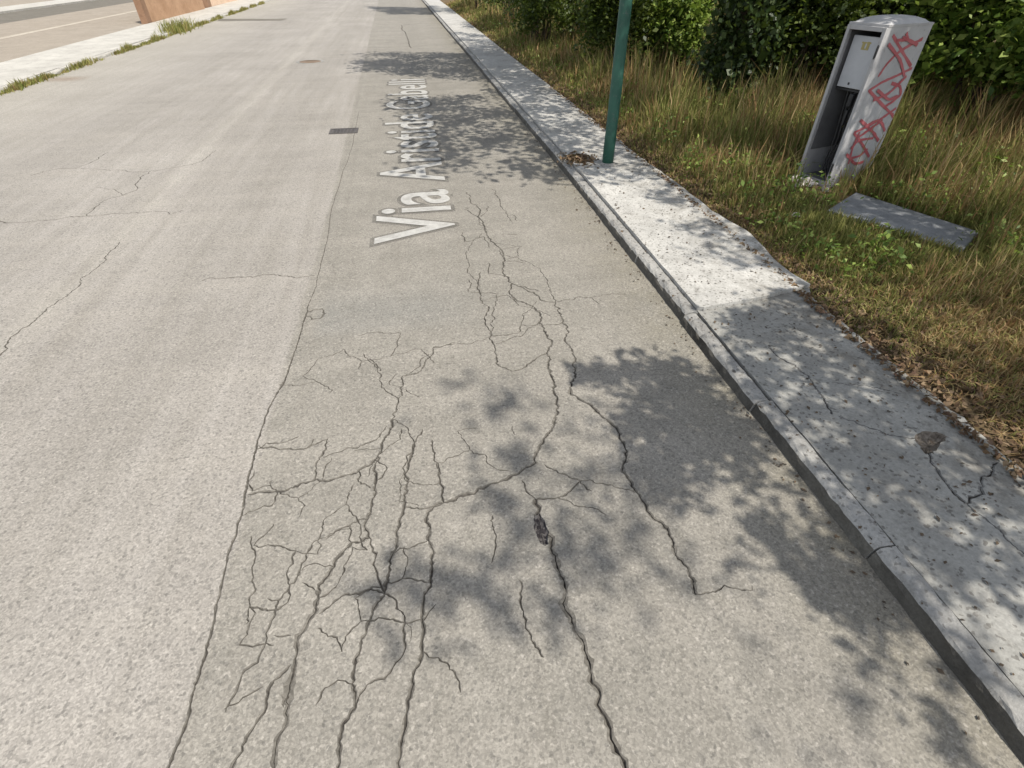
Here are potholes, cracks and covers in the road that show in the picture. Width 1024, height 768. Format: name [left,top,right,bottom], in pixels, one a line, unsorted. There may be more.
pothole [534,513,549,546]
crack [0,242,120,356]
crack [166,117,753,768]
crack [0,151,215,223]
